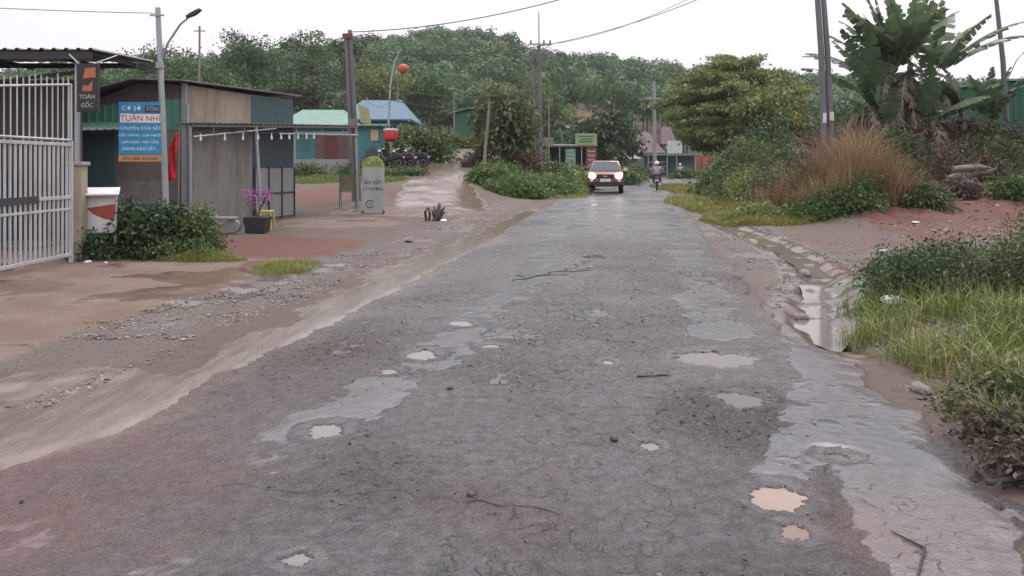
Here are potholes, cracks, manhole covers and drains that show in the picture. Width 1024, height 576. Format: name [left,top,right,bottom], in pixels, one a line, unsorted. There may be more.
pothole [810,447,864,464]
pothole [439,319,482,327]
crack [449,275,700,437]
pothole [704,388,778,412]
pothole [736,479,822,518]
crack [218,422,705,576]
pothole [627,437,673,454]
pothole [661,348,769,370]
pothole [262,543,332,574]
pothole [398,347,447,361]
pothole [295,419,356,442]
pothole [764,515,828,548]
